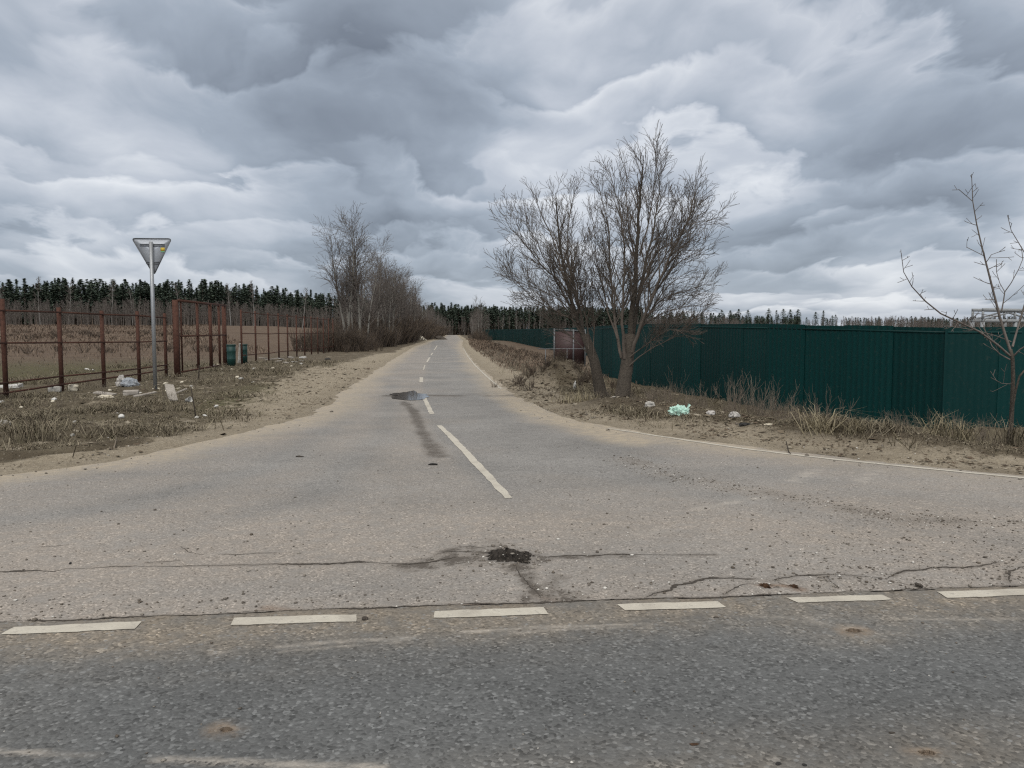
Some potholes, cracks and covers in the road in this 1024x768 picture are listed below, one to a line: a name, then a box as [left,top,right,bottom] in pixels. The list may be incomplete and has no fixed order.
pothole [891,737,964,768]
crack [0,546,480,572]
pothole [194,716,258,746]
pothole [473,544,548,568]
pothole [827,622,882,640]
crack [649,562,996,596]
